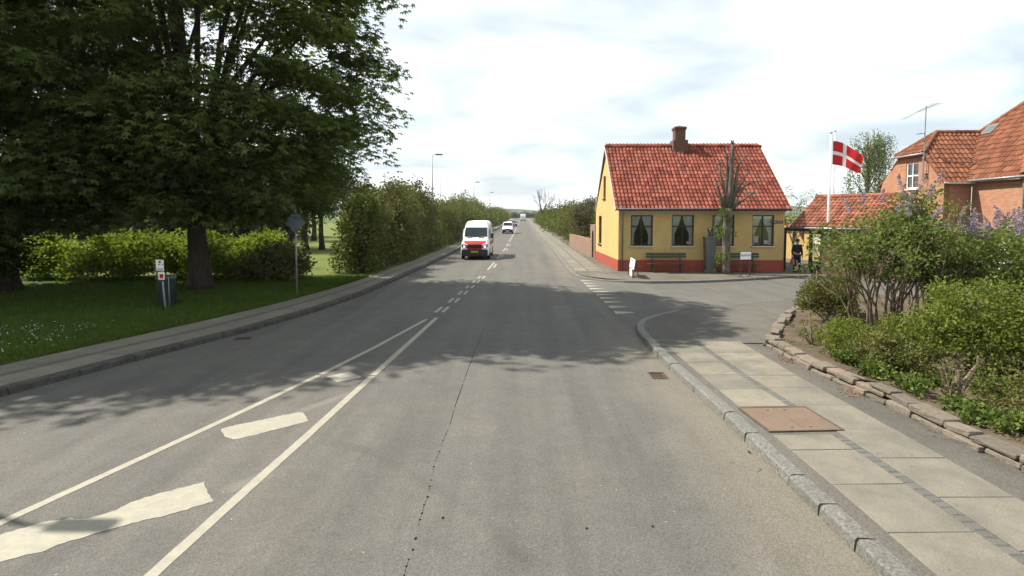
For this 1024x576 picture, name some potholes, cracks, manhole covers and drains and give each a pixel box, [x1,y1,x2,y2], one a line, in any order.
manhole cover [738,406,845,433]
crack [403,329,484,576]
